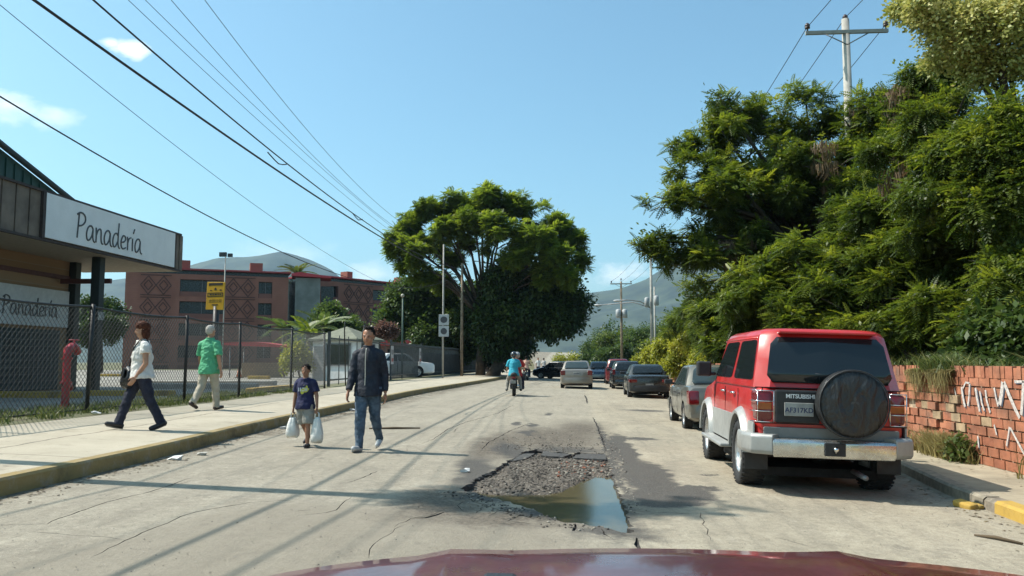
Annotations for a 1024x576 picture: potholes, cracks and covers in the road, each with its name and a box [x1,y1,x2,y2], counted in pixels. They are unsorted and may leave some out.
crack [369,491,538,554]
pothole [438,431,650,535]
crack [40,478,297,557]
